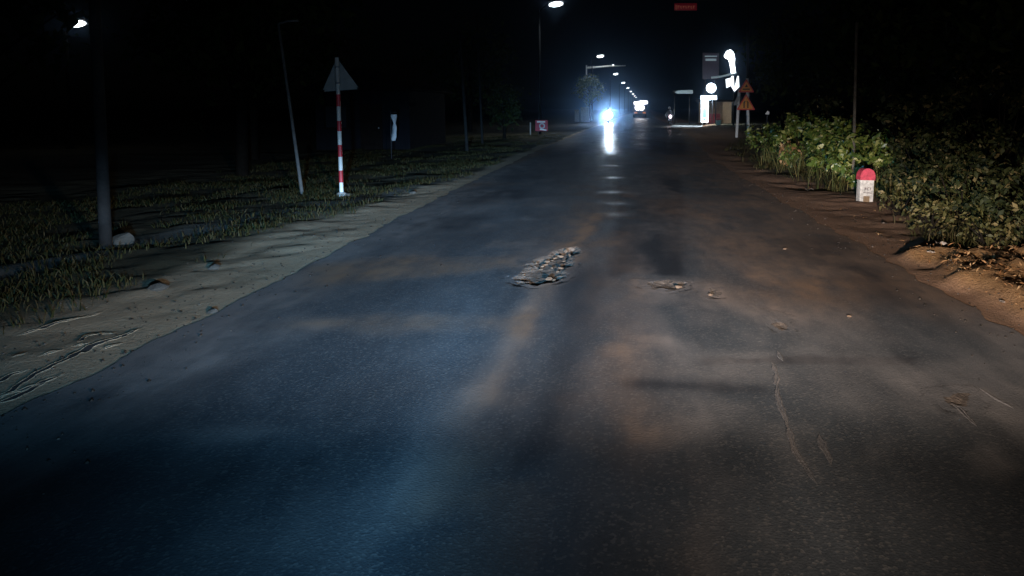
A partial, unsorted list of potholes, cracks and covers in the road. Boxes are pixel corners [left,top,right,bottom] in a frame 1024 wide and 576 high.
pothole [504,243,591,288]
crack [771,351,833,484]
crack [951,388,1013,426]
pothole [628,278,692,295]
